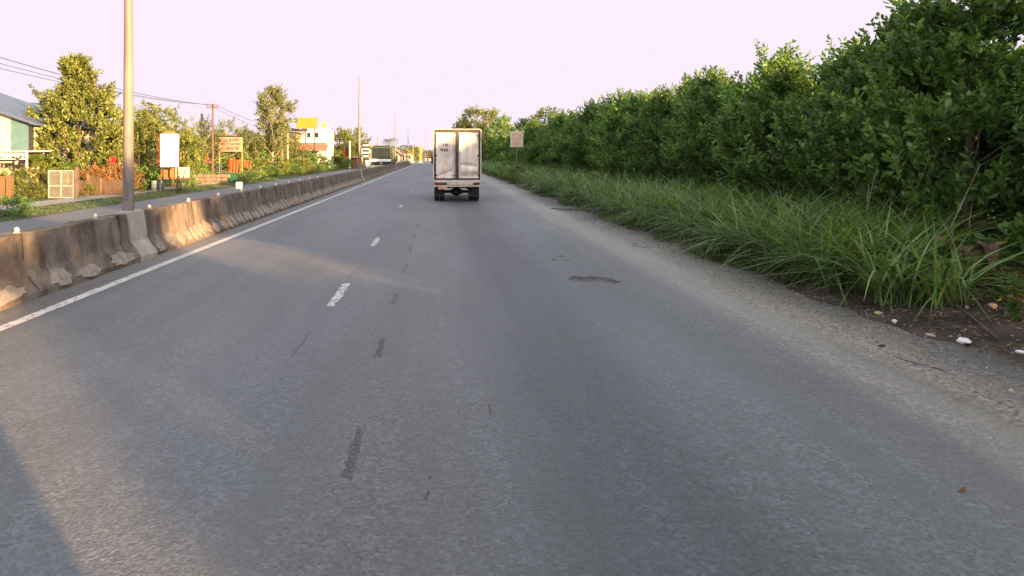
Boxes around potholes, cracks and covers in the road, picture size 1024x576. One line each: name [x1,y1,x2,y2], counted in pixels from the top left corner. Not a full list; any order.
crack [896,357,946,372]
pothole [568,276,623,284]
